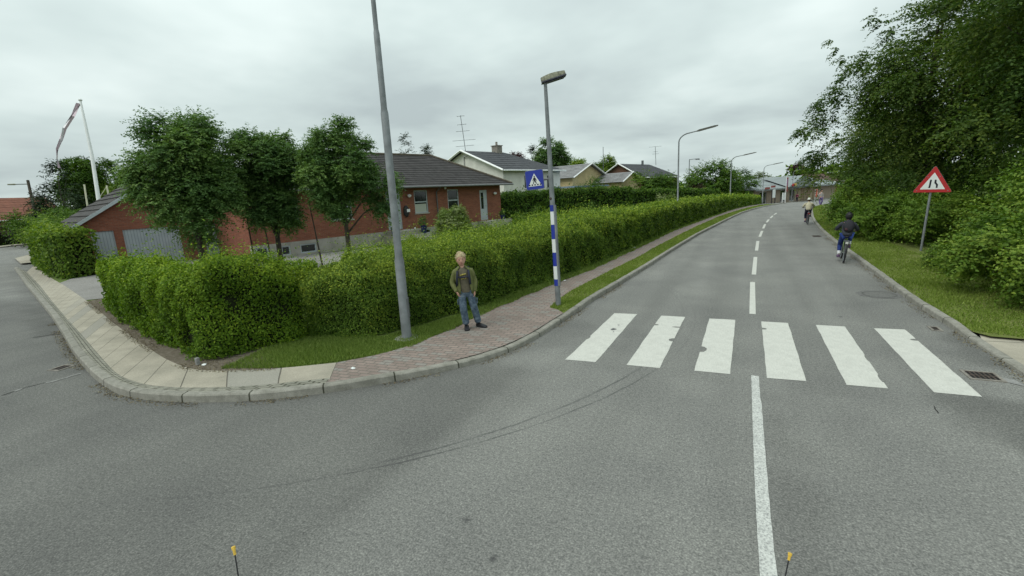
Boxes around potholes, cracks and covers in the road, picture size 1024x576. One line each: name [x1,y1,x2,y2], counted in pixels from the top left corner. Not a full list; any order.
drain grate [959,369,1024,386]
manhole cover [856,291,903,299]
